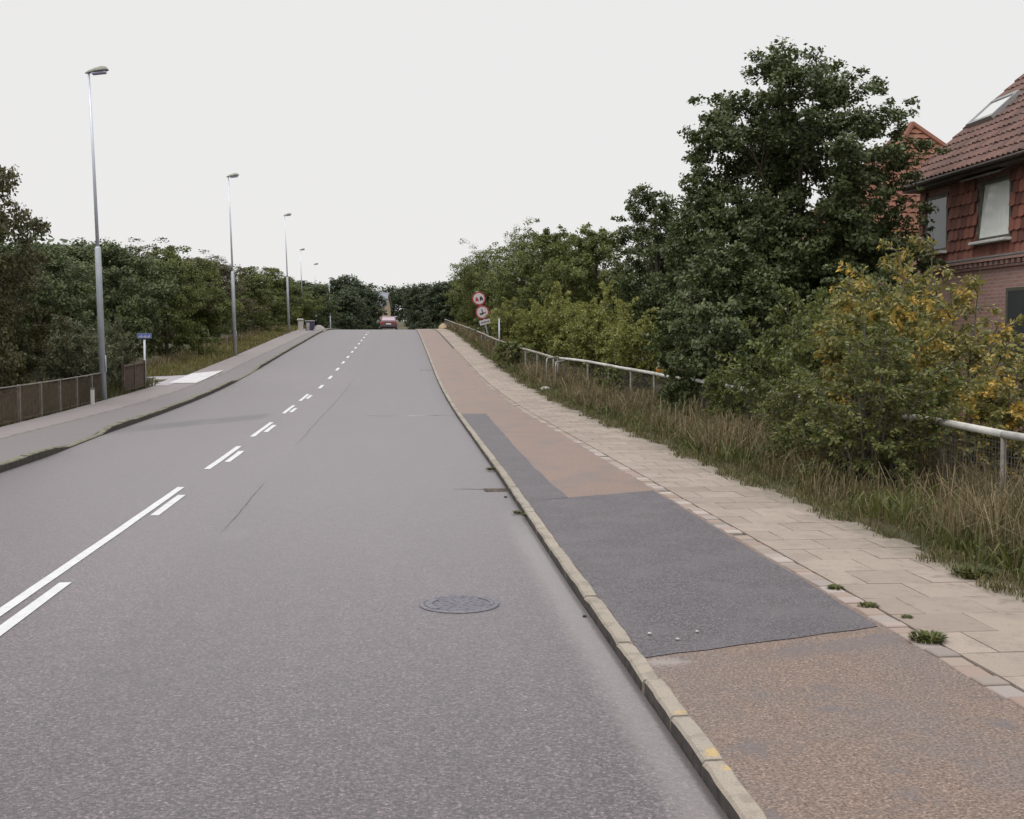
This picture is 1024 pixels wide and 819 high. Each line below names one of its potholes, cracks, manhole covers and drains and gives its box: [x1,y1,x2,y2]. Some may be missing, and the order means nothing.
manhole cover [419,595,499,613]
